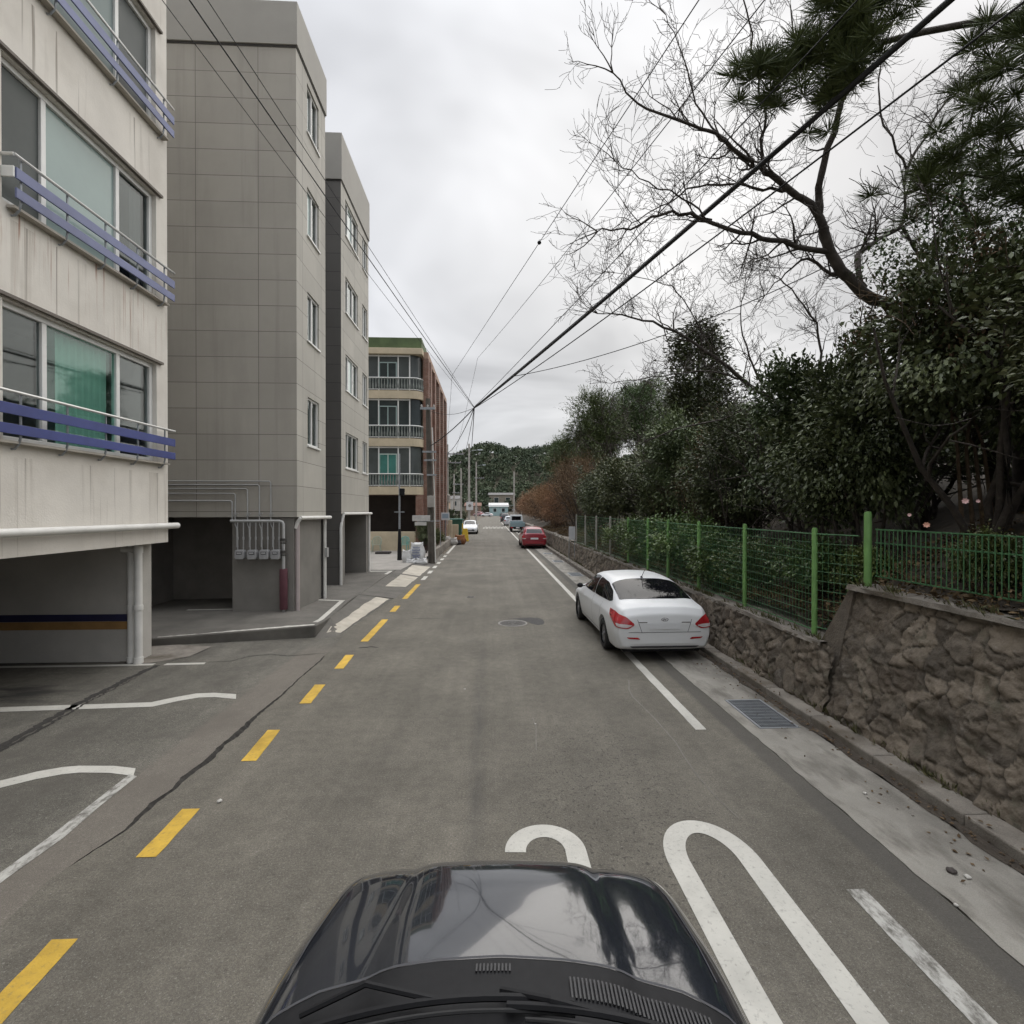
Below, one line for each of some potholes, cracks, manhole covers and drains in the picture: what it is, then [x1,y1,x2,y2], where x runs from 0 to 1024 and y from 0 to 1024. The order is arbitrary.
crack [0,647,324,867]
drain grate [725,699,801,729]
